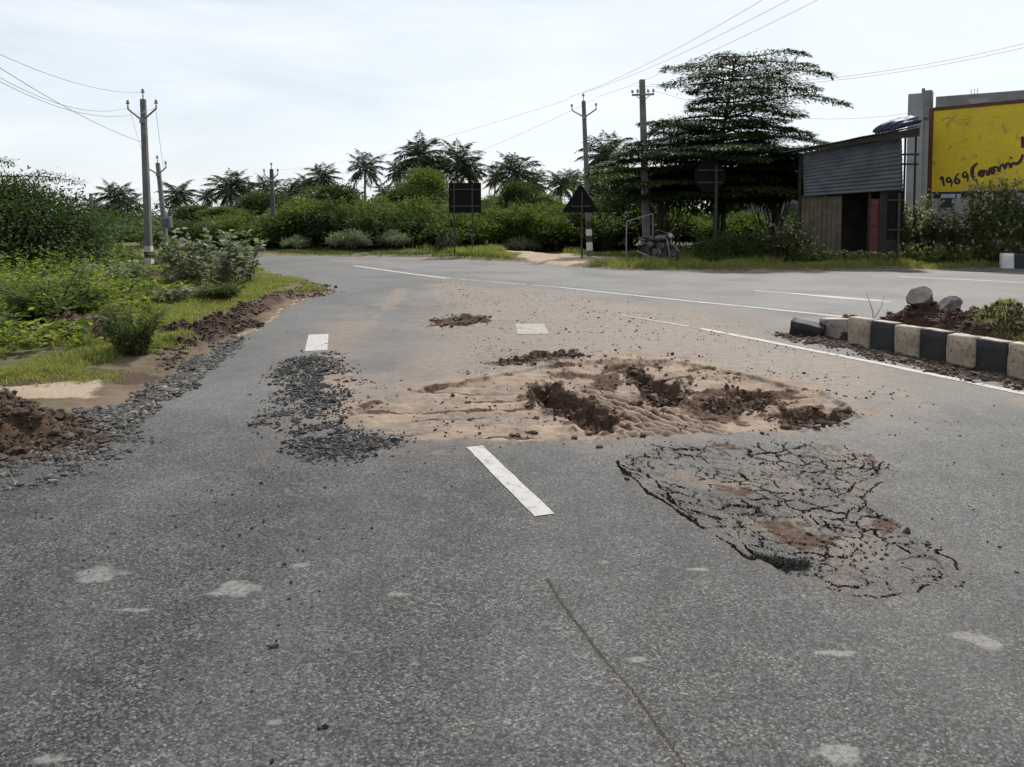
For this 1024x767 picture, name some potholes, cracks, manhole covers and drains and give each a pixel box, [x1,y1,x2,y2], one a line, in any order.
pothole [338,358,853,442]
crack [616,441,972,598]
crack [546,579,686,767]
